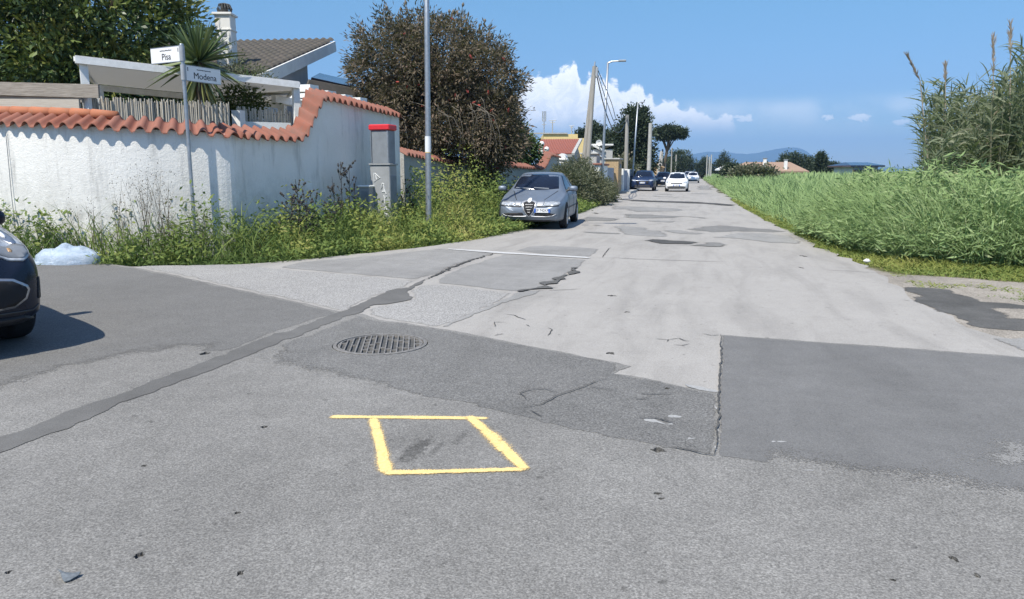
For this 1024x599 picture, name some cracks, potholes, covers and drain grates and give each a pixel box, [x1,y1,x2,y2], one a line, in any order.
crack [520,378,611,415]
